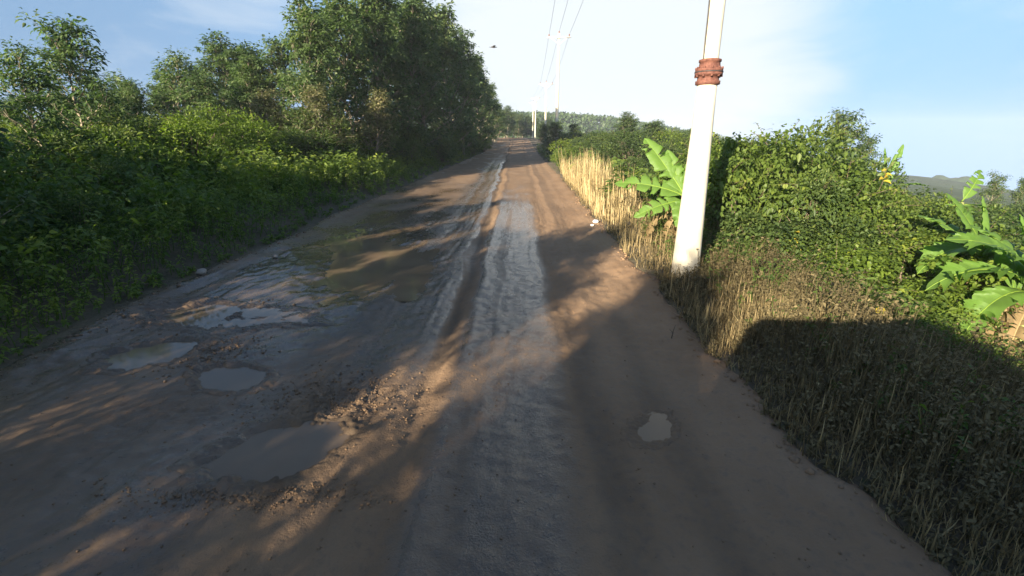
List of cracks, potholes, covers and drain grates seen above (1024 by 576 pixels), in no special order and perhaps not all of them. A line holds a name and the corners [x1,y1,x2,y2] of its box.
pothole [620,408,681,450]
pothole [166,410,378,496]
pothole [123,296,337,336]
pothole [182,358,281,397]
pothole [78,333,223,376]
